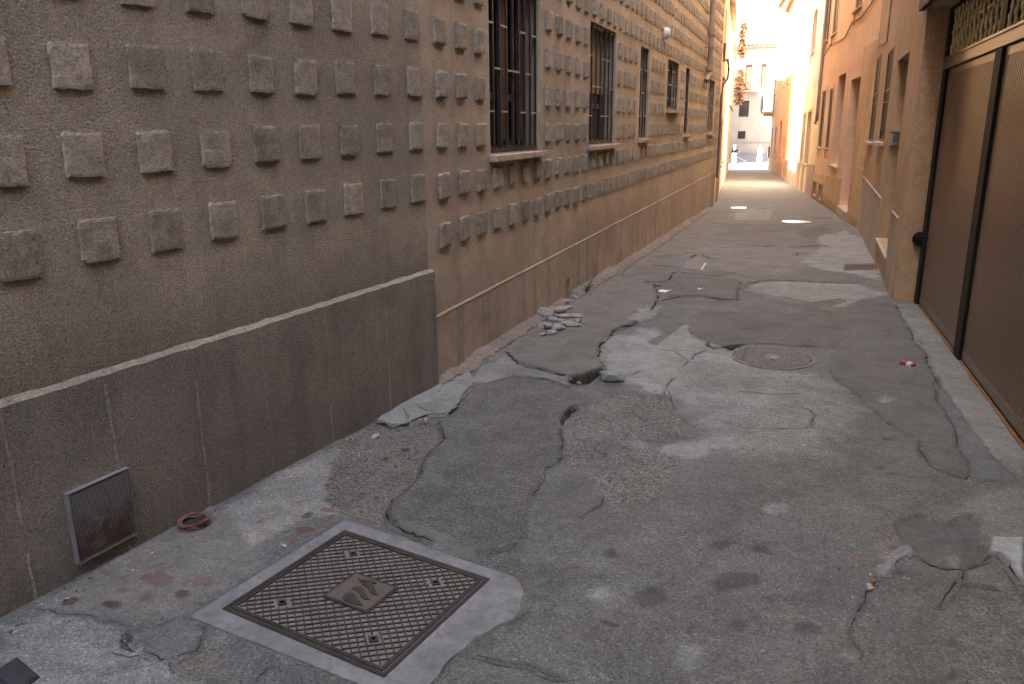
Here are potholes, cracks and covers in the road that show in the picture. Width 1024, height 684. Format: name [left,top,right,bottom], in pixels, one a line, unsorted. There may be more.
pothole [556,403,588,430]
crack [843,549,1024,671]
crack [372,279,863,546]
crack [741,244,835,256]
crack [892,305,975,483]
manhole cover [731,346,815,370]
pothole [562,364,604,386]
drain grate [843,263,878,271]
manhole cover [190,520,524,684]
